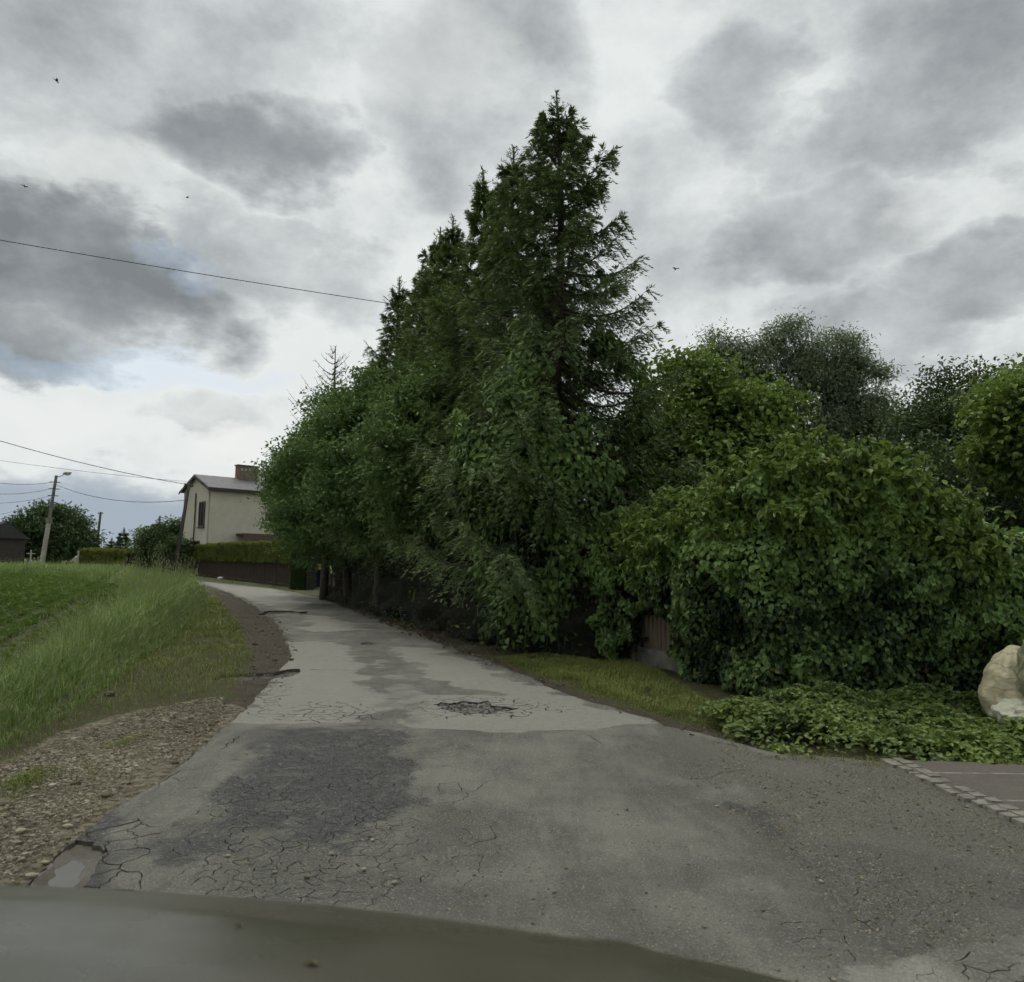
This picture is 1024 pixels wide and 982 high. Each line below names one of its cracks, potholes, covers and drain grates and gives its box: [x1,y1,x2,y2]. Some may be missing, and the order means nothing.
crack [165,728,504,909]
crack [215,642,393,723]
crack [84,818,163,891]
pothole [435,700,518,715]
